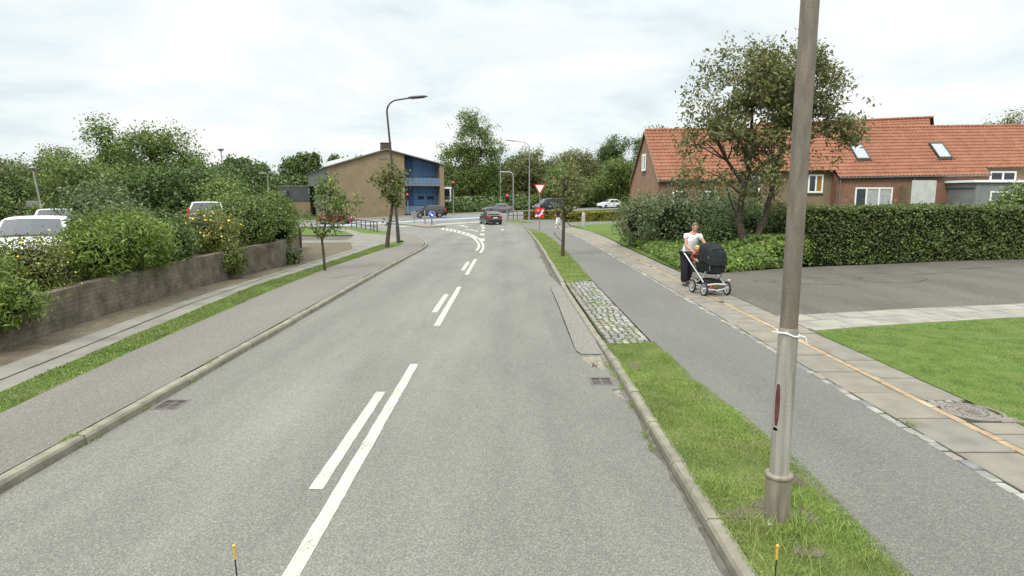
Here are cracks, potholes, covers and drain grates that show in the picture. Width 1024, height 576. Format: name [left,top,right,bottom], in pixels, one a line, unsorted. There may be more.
drain grate [149,399,192,410]
manhole cover [927,402,1024,425]
drain grate [588,377,615,385]
